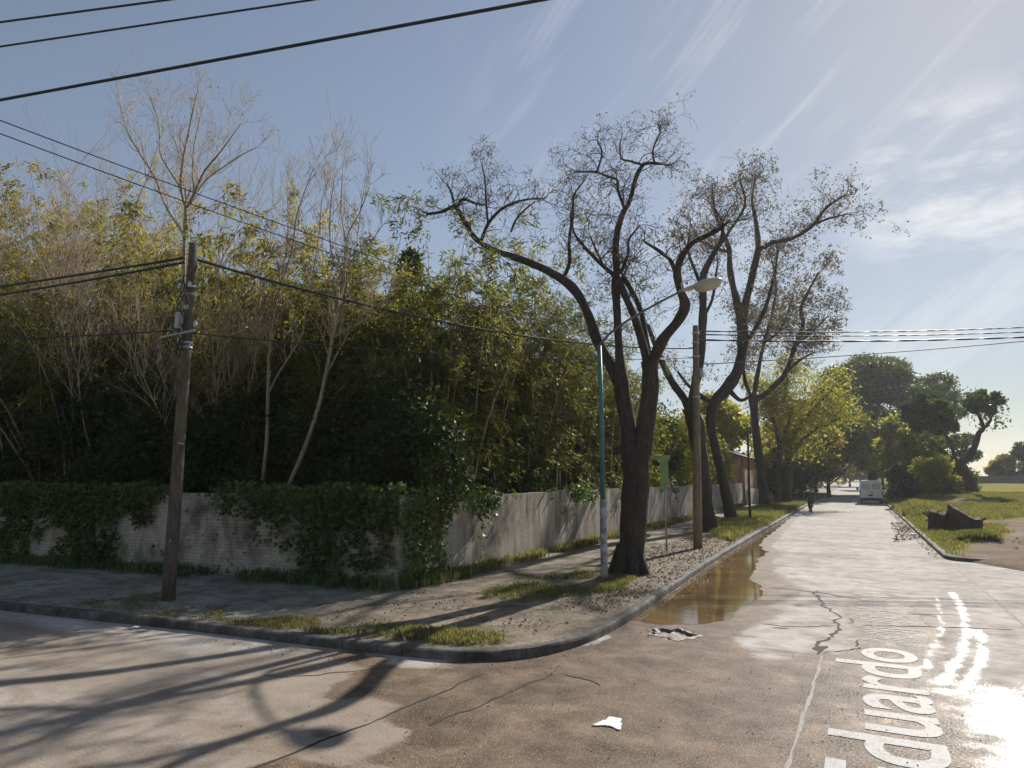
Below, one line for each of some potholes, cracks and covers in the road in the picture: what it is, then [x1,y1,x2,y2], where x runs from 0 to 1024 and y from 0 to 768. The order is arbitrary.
crack [430,674,600,725]
pothole [645,627,703,641]
crack [768,587,1014,654]
